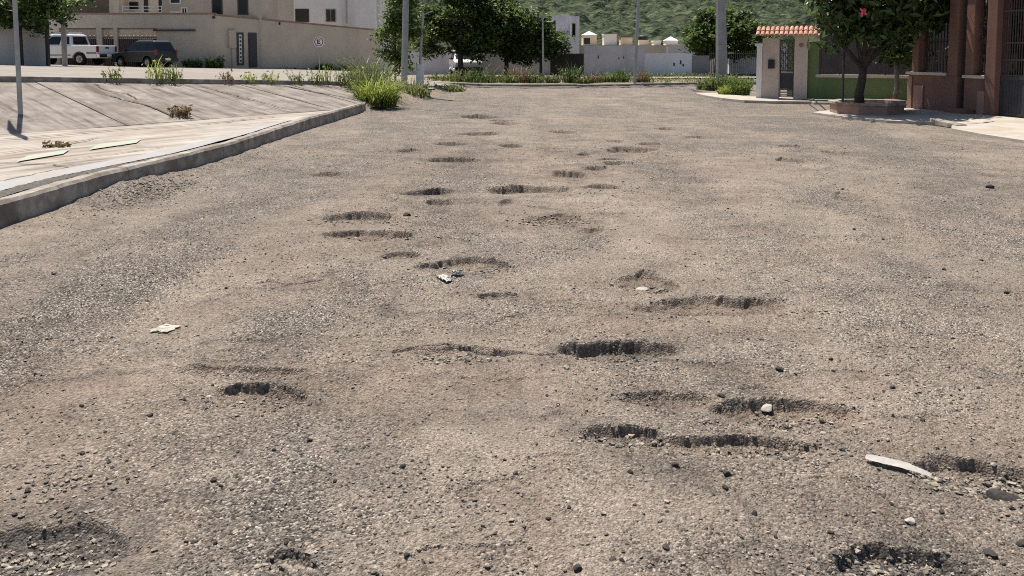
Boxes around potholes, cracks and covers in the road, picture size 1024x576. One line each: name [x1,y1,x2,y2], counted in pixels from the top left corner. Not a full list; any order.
pothole [604,268,700,297]
pothole [393,187,463,196]
pothole [387,344,536,362]
pothole [571,421,676,450]
pothole [801,541,996,576]
pothole [412,263,431,273]
pothole [426,255,524,273]
pothole [550,339,694,366]
pothole [610,294,814,321]
pothole [514,213,592,227]
pothole [694,396,875,441]
pothole [473,184,579,196]
